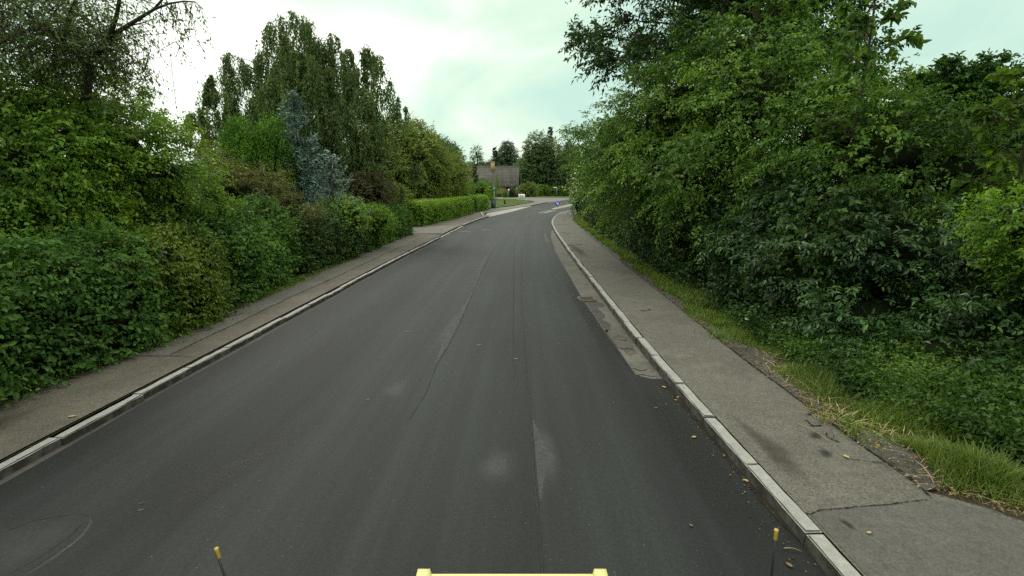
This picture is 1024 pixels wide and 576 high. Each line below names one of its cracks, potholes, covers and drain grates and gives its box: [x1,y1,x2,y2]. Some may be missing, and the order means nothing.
manhole cover [24,519,93,576]
